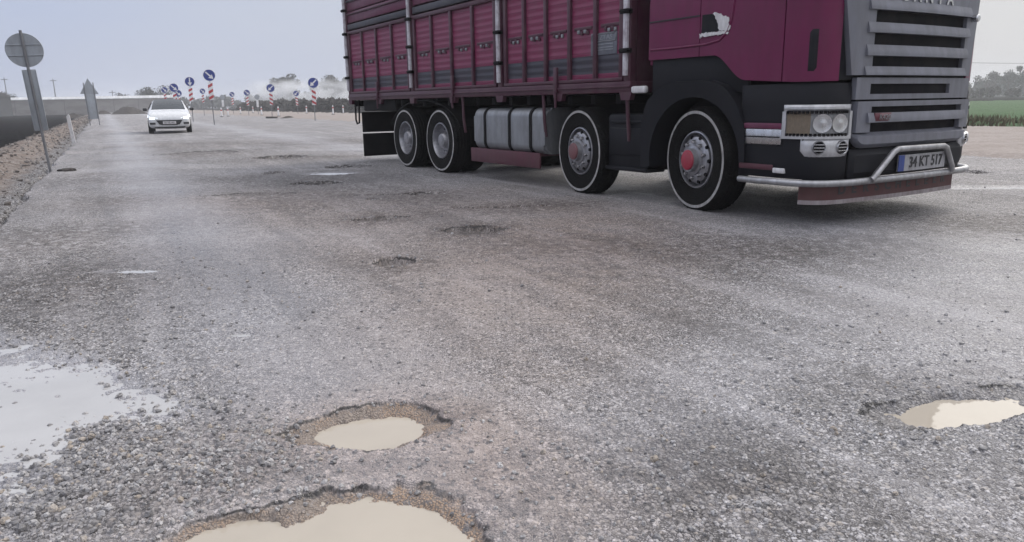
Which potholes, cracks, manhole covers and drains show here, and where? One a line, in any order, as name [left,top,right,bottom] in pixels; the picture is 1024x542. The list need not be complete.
pothole [259,394,474,458]
pothole [435,224,516,237]
pothole [847,380,1024,436]
pothole [149,472,507,542]
pothole [345,215,413,223]
pothole [367,256,420,268]
